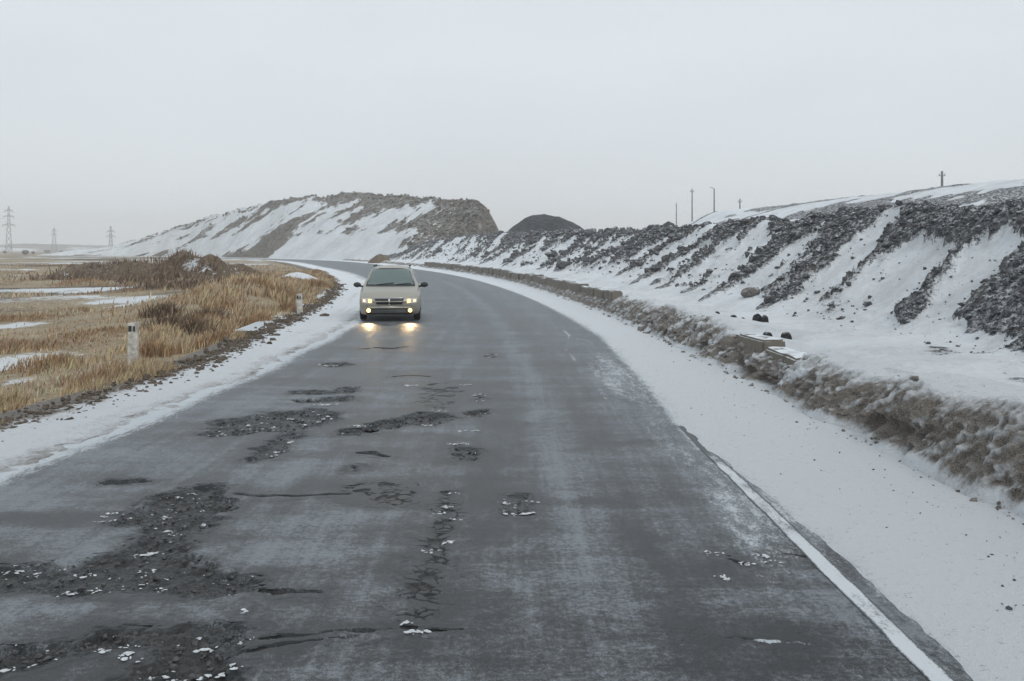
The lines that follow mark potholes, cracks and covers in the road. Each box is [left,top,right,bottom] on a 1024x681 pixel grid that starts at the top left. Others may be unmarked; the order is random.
pothole [188,407,353,463]
pothole [0,608,289,681]
